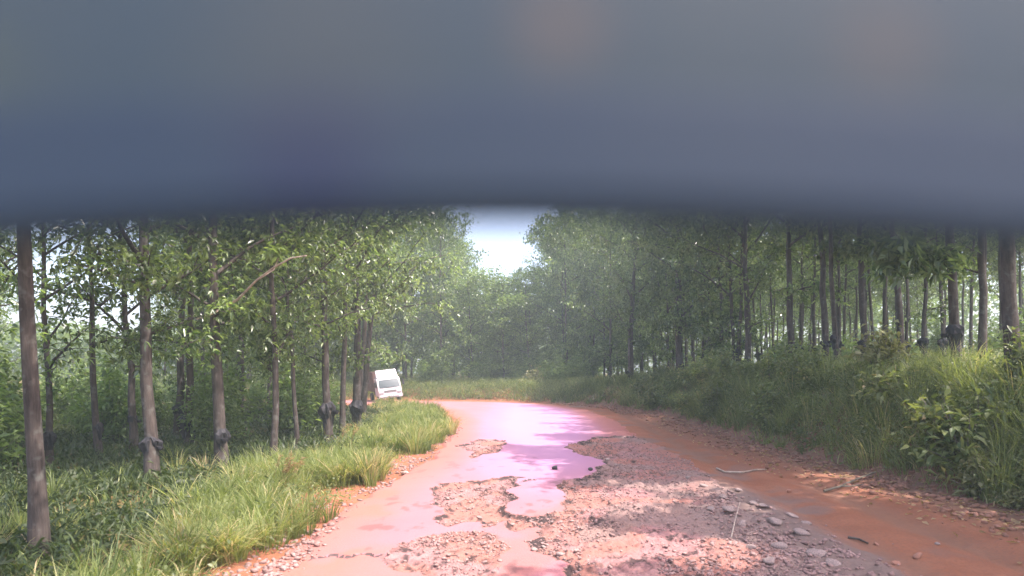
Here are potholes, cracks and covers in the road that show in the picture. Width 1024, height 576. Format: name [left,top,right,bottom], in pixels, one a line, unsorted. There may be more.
pothole [454,439,506,458]
pothole [526,435,832,576]
